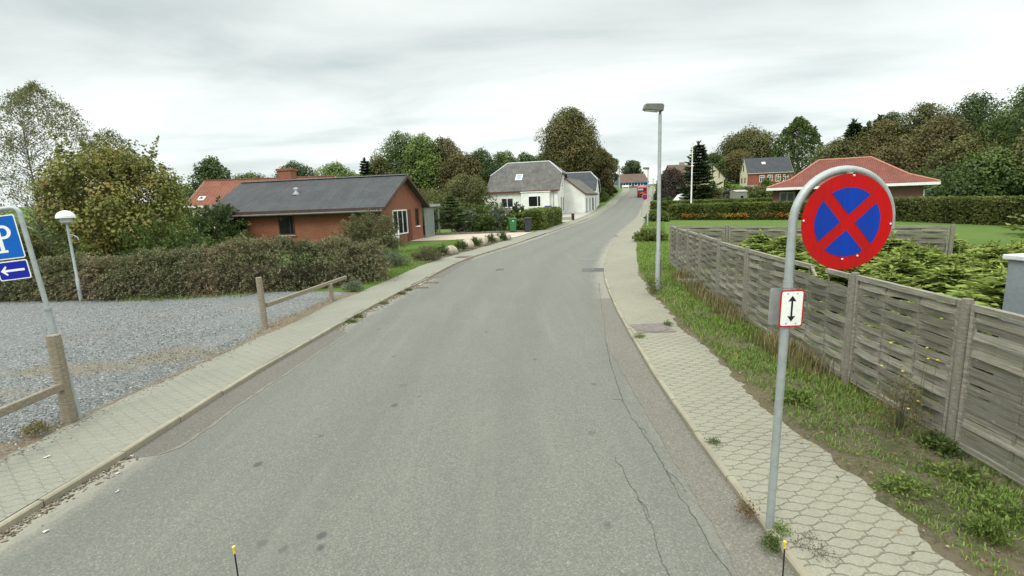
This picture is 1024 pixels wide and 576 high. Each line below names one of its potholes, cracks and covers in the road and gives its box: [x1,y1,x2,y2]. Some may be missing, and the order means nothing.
crack [599,283,732,576]
manhole cover [630,323,676,333]
